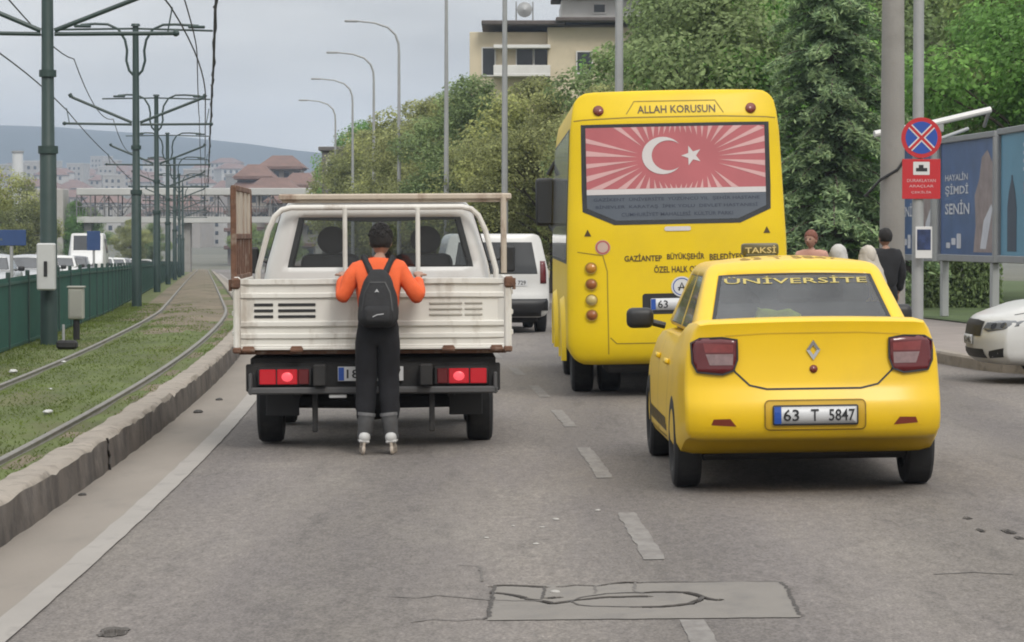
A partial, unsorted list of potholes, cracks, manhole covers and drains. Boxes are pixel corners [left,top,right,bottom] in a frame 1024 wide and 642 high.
pothole [98,627,130,637]
crack [399,565,802,622]
